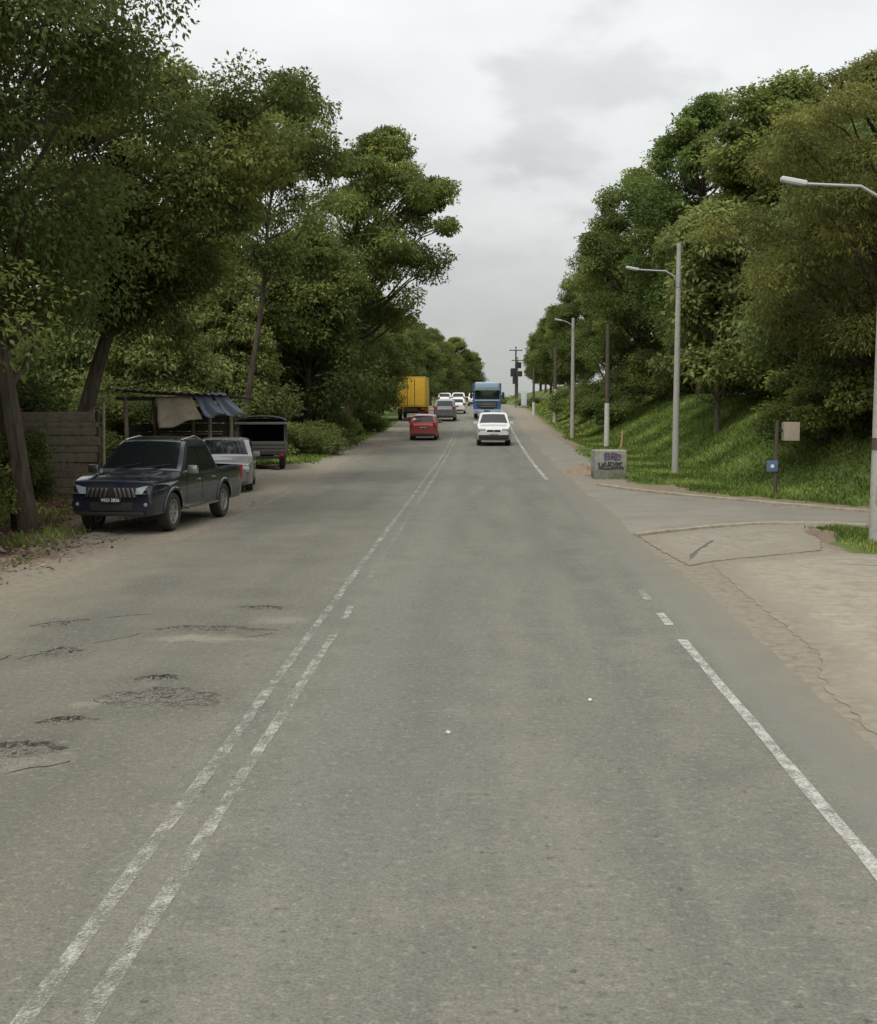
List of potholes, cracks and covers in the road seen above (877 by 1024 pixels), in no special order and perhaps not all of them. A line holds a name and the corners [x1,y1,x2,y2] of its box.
pothole [13,647,88,661]
pothole [31,619,92,628]
pothole [36,716,100,724]
pothole [0,740,69,758]
